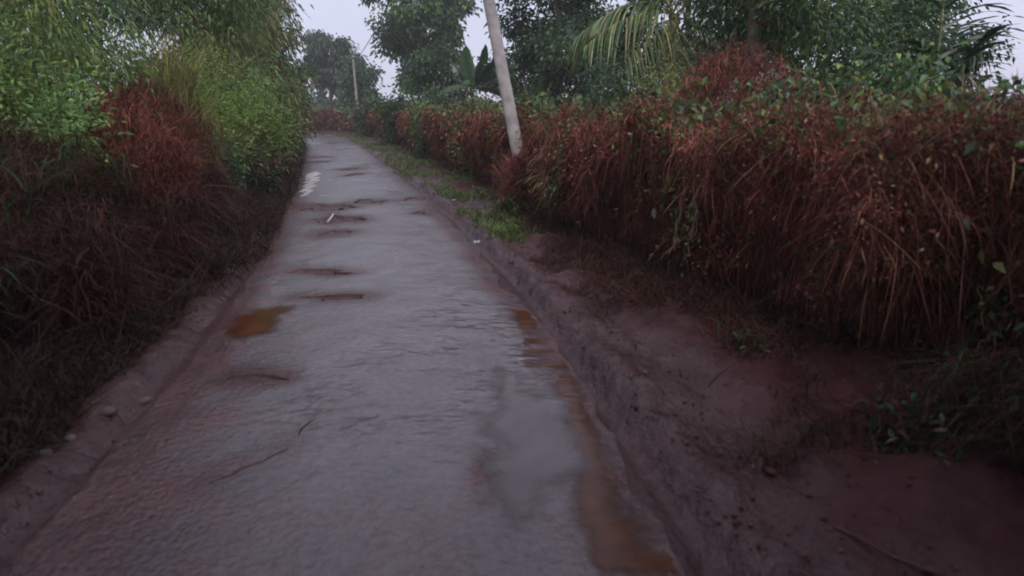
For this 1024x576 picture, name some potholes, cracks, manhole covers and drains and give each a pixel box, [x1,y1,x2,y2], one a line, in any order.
crack [209,417,318,483]
pothole [311,215,367,224]
pothole [289,268,356,276]
